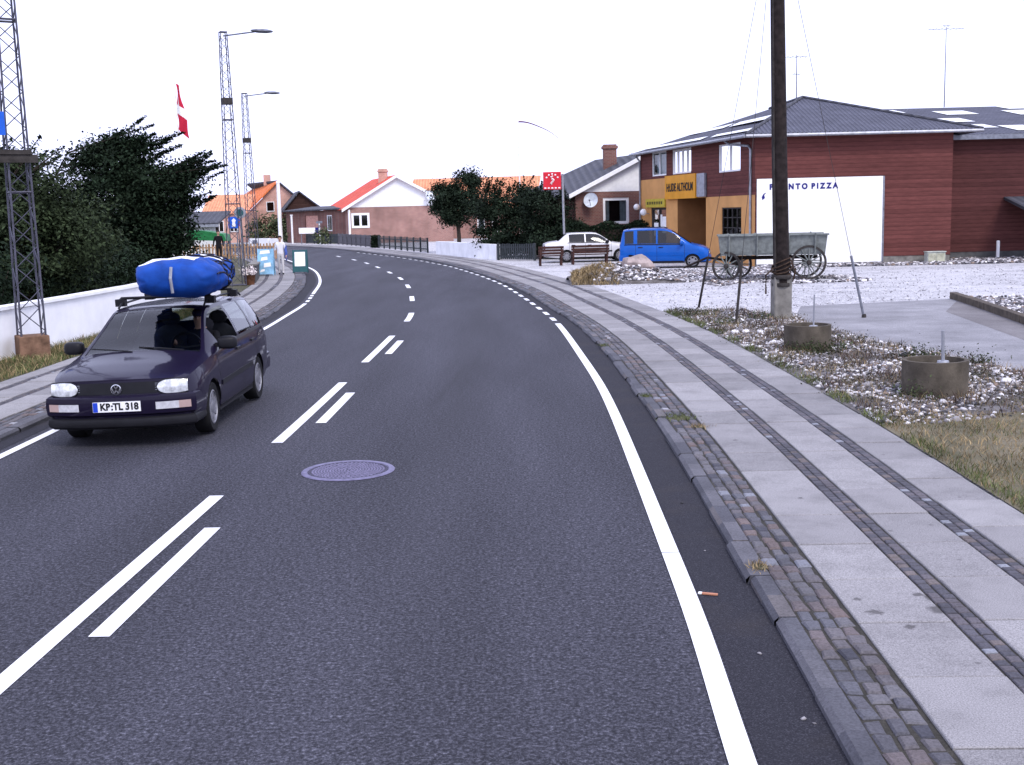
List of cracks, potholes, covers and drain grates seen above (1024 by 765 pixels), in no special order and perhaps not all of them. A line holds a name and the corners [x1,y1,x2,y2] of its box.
manhole cover [301,460,395,481]
